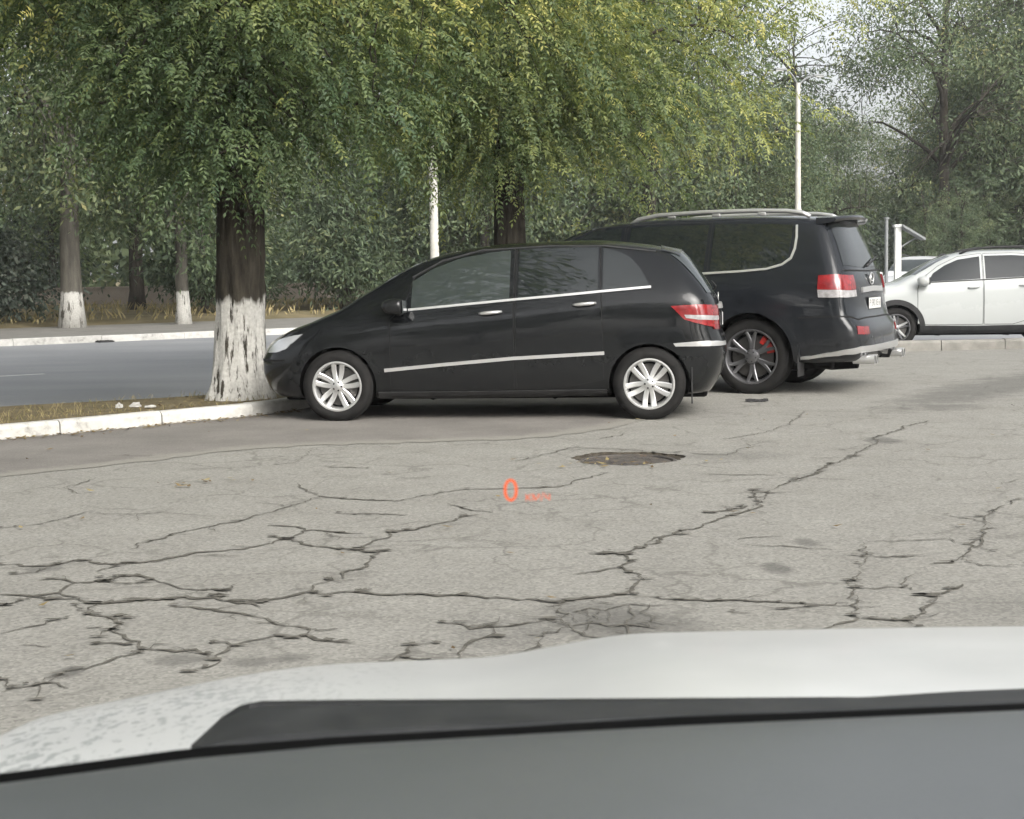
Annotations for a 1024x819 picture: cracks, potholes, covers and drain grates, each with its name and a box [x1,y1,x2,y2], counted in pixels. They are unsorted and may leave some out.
crack [515,411,805,461]
crack [0,420,1016,699]
manhole cover [579,454,677,466]
